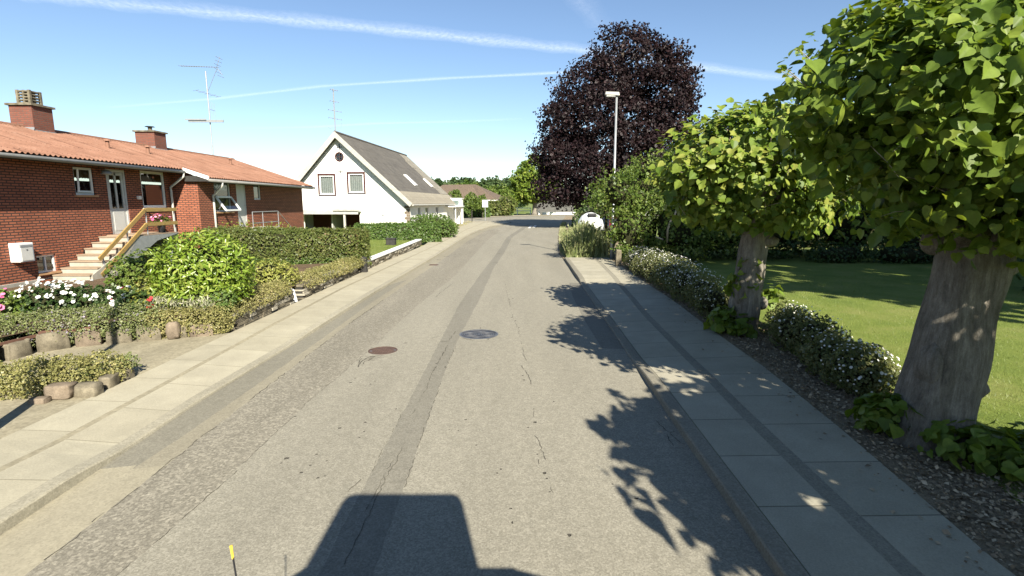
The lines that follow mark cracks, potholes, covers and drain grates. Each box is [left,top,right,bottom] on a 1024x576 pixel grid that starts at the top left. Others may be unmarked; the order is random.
crack [344,327,489,564]
manhole cover [459,329,498,339]
crack [504,281,552,491]
manhole cover [368,346,398,355]
